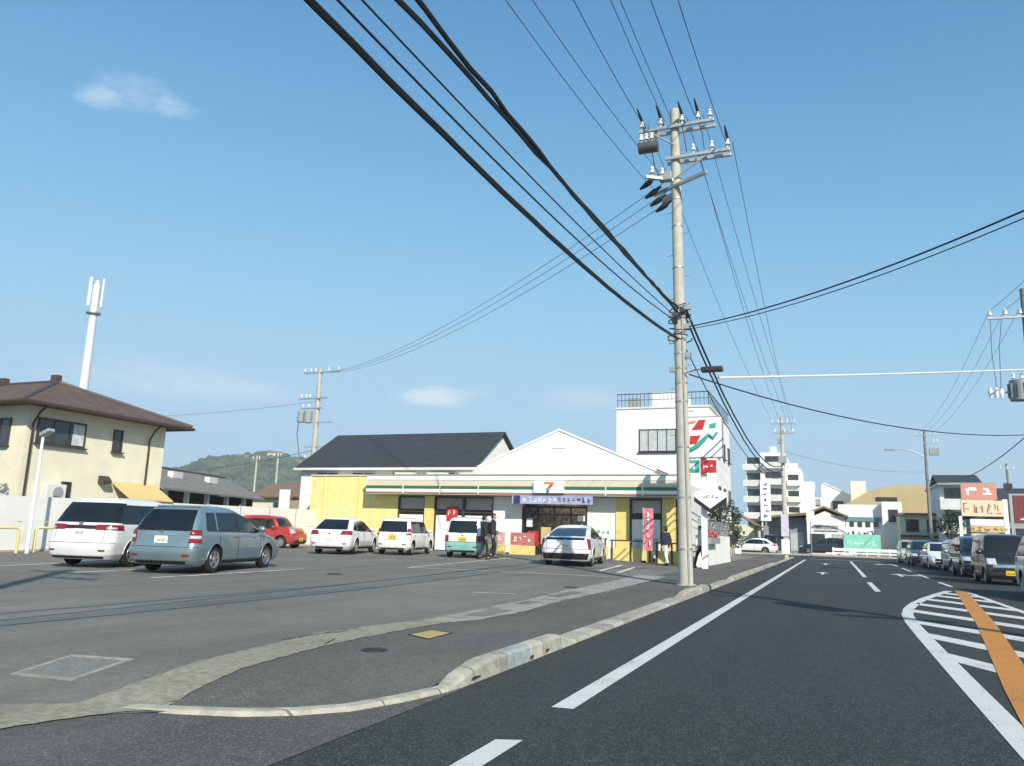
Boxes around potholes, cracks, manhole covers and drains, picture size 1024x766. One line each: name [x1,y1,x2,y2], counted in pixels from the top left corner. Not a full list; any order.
manhole cover [10,654,134,681]
manhole cover [408,629,453,640]
